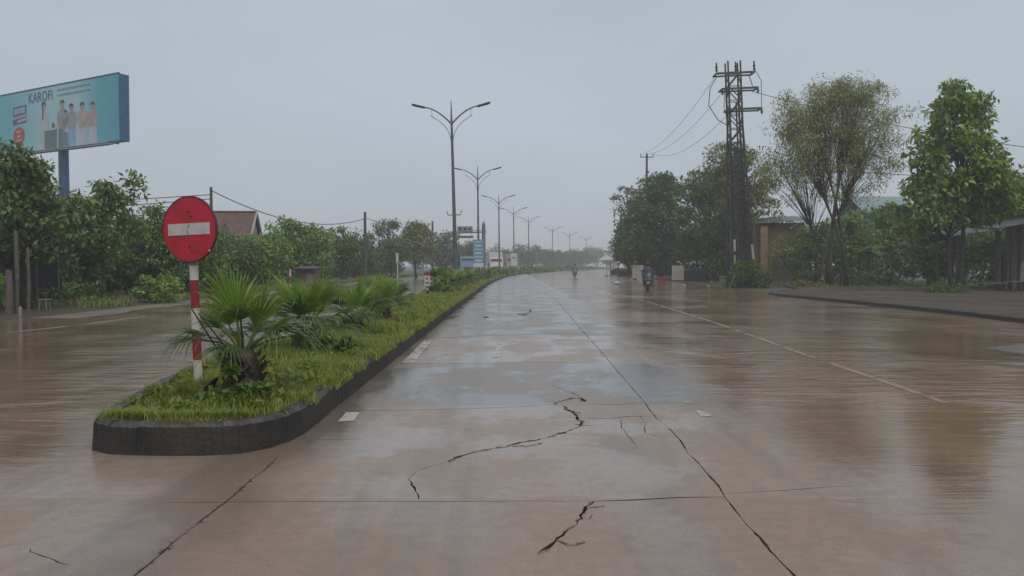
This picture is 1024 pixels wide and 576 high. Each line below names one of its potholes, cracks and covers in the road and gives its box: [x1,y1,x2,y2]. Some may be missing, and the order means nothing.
crack [537,500,604,554]
crack [369,385,590,500]
crack [558,302,796,576]
